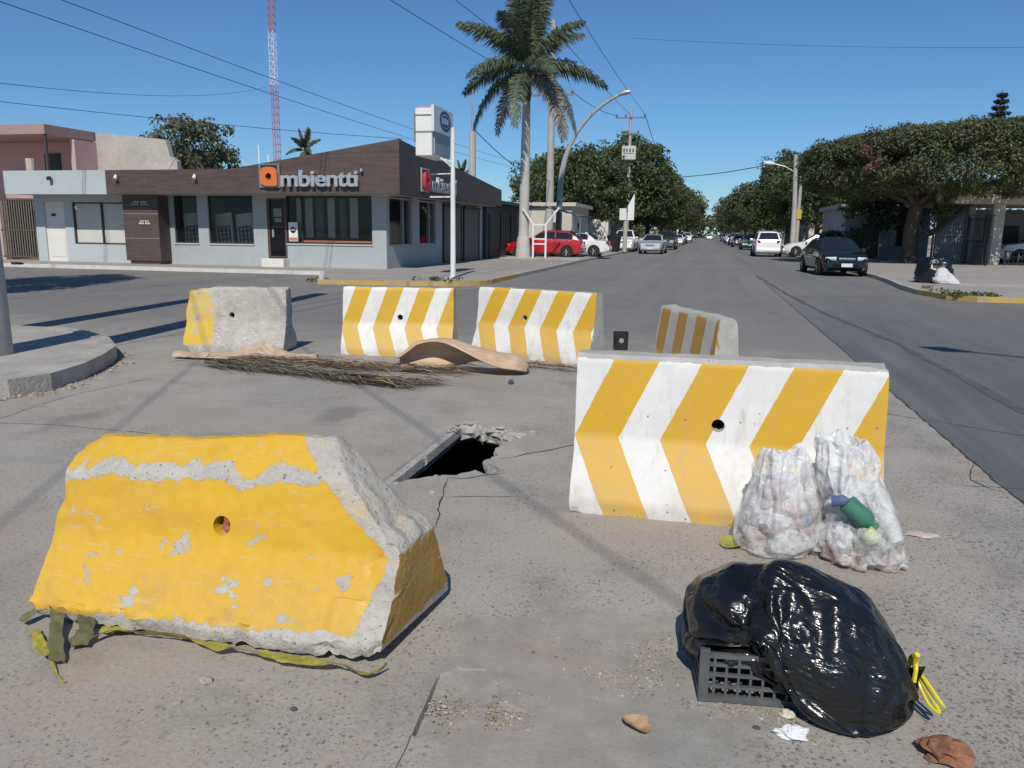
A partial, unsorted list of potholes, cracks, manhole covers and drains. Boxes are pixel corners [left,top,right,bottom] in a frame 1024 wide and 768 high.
pothole [384,421,539,485]
crack [435,445,571,526]
